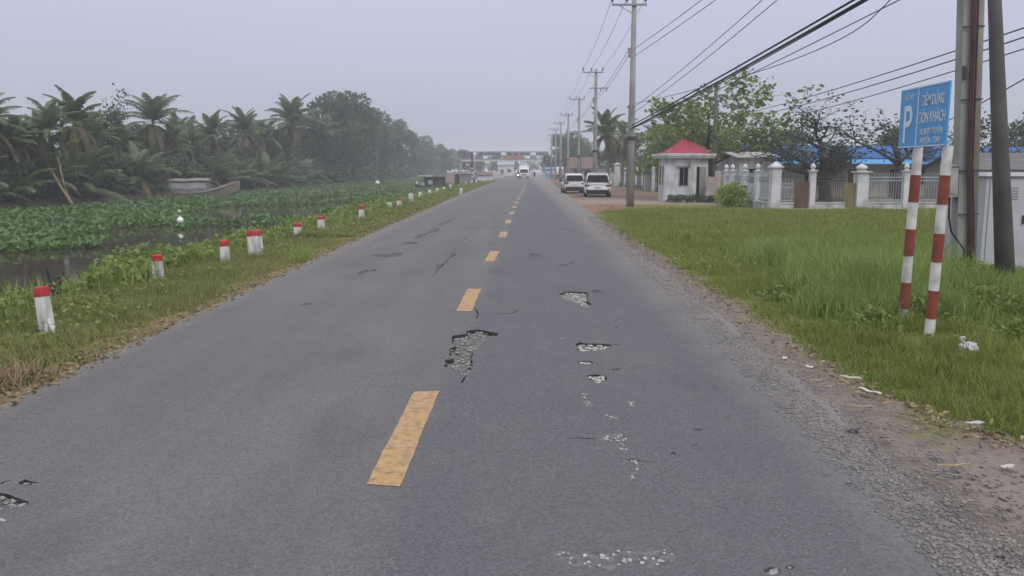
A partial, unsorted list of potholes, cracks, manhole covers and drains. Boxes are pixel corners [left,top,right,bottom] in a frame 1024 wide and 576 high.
pothole [628,458,642,480]
pothole [552,549,677,571]
pothole [559,292,591,307]
pothole [580,391,594,407]
pothole [587,374,607,383]
pothole [0,493,28,509]
pothole [444,329,498,376]
pothole [575,342,612,352]
pothole [593,432,628,451]
